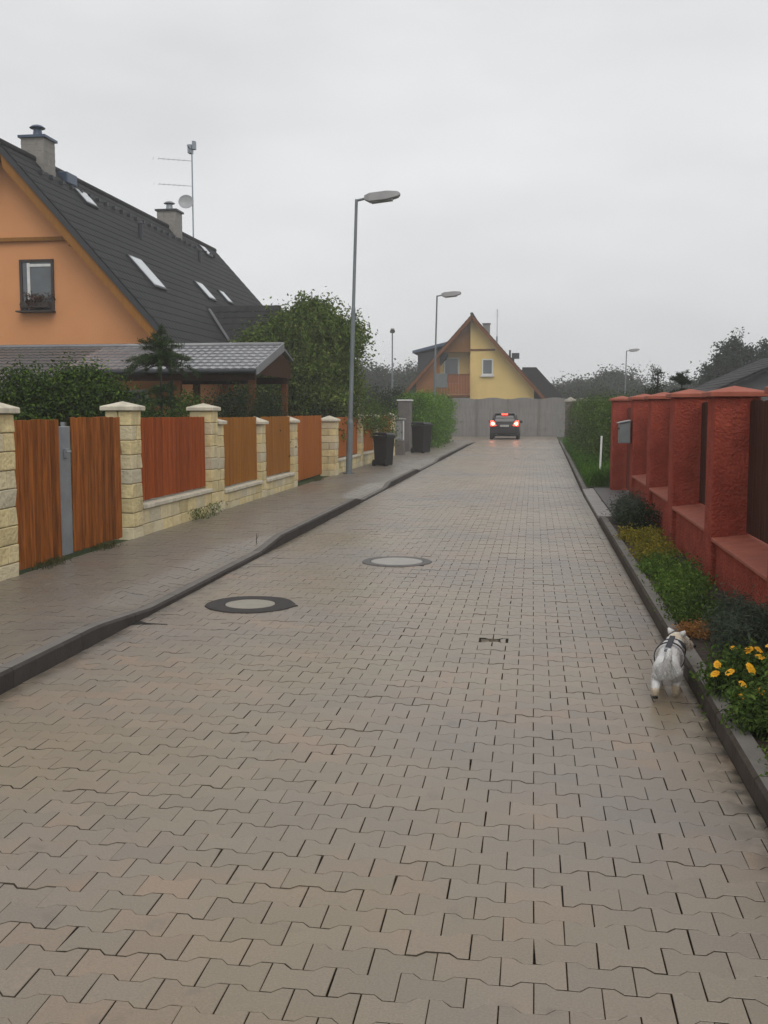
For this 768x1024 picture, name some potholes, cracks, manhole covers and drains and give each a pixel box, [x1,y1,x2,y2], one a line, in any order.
manhole cover [205,596,298,614]
manhole cover [362,556,432,567]
